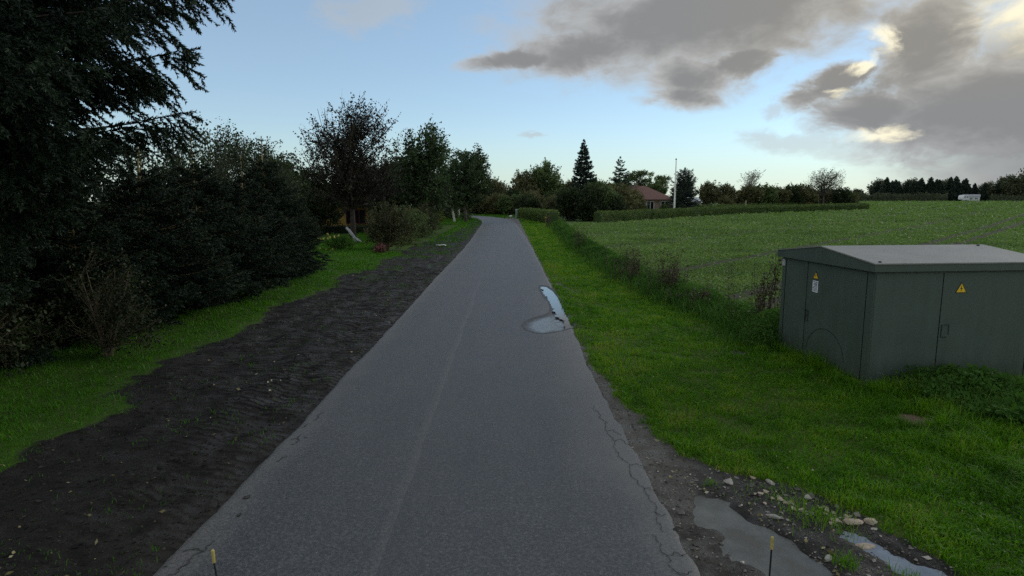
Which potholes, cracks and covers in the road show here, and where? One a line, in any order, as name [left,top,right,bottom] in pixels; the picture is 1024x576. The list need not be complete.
pothole [521,285,576,334]
crack [593,409,692,576]
crack [167,540,215,576]
